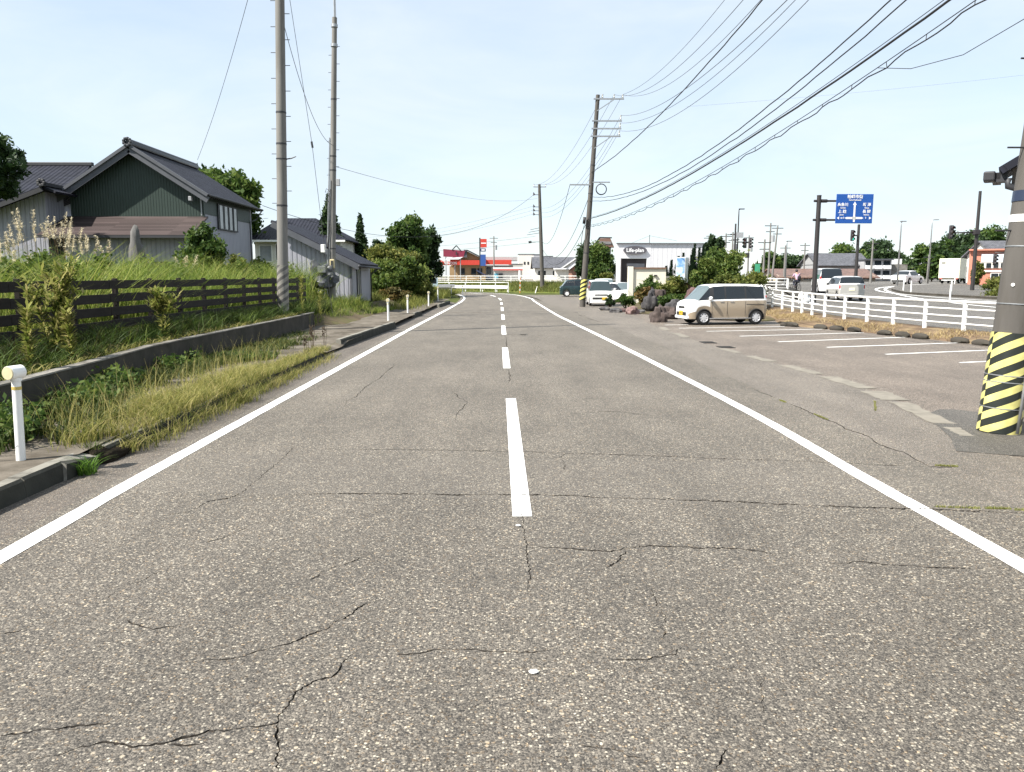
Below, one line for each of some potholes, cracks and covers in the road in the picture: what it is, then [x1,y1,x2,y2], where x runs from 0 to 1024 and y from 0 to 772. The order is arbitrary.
crack [0,599,384,770]
crack [831,561,970,569]
crack [170,447,294,515]
crack [528,545,785,568]
